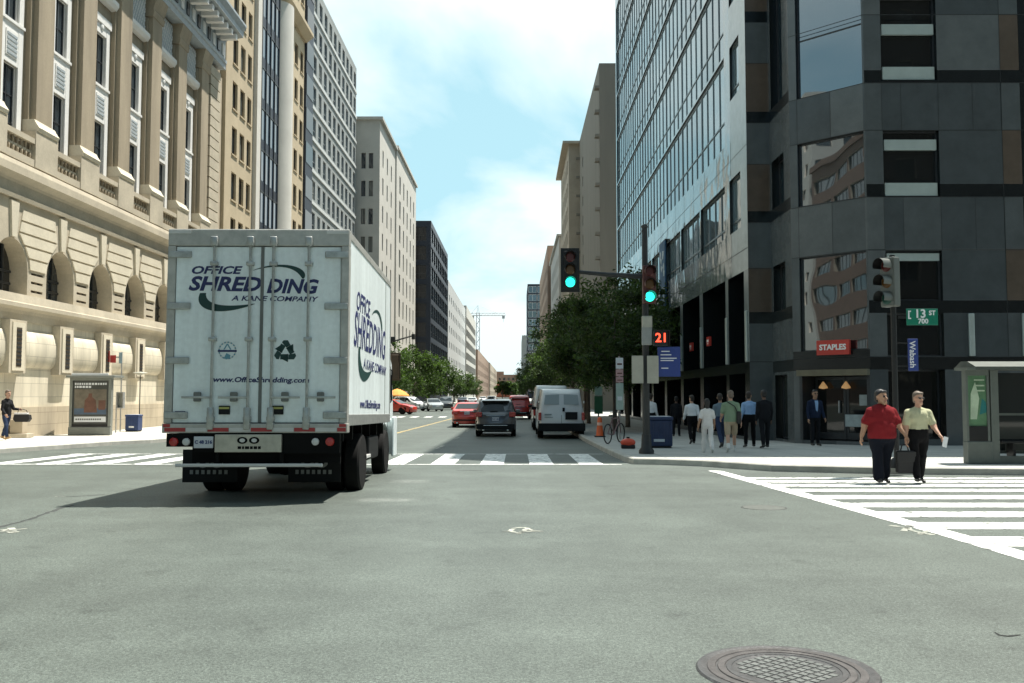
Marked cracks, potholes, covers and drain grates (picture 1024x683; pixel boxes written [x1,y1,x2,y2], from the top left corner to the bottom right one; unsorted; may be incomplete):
manhole cover [696,645,882,683]
